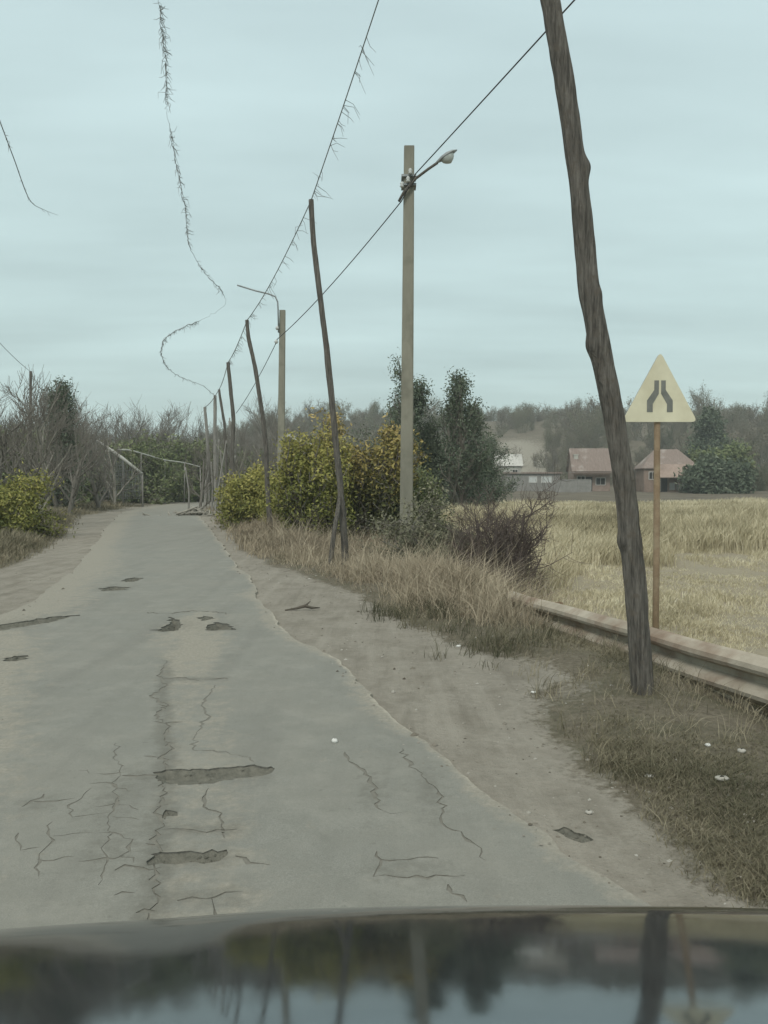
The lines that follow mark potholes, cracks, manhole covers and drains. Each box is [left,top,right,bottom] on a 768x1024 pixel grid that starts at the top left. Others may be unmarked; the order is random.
pothole [206,622,236,631]
pothole [554,827,593,843]
crack [236,856,270,865]
pothole [0,615,80,631]
crack [15,662,254,919]
crack [373,851,467,902]
pothole [146,849,228,866]
pothole [153,764,275,785]
crack [399,750,483,859]
crack [344,752,394,814]
pothole [156,617,183,632]
